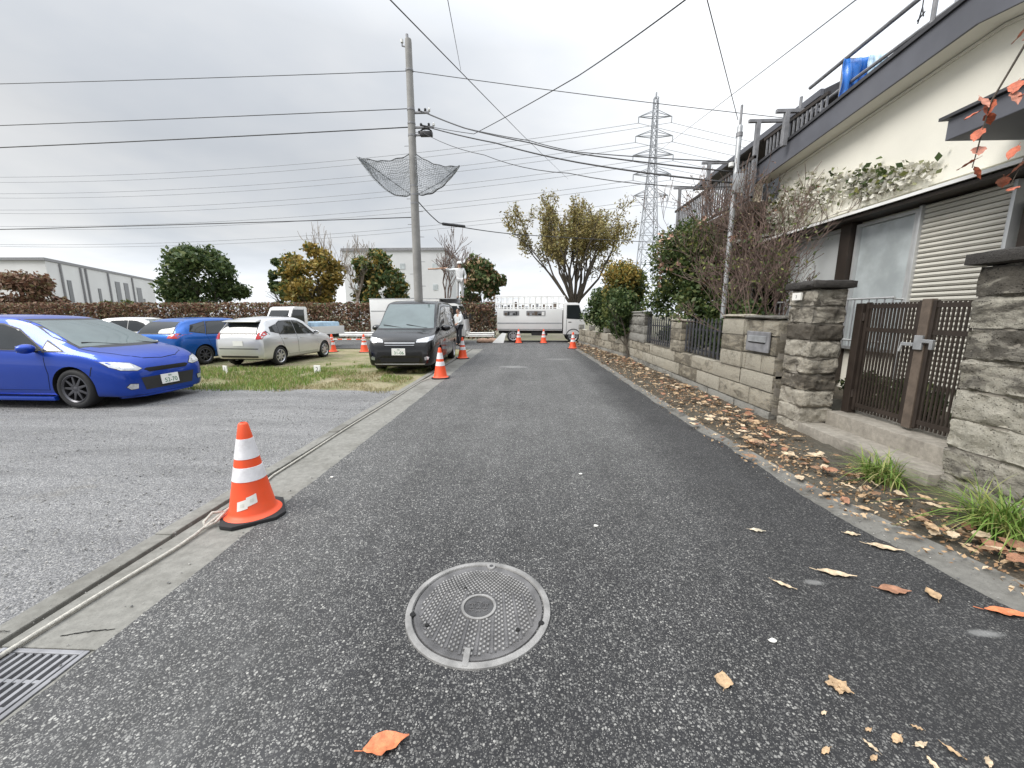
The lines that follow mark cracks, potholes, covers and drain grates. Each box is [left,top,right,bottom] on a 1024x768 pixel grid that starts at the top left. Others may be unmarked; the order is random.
drain grate [0,648,90,722]
manhole cover [405,562,550,671]
